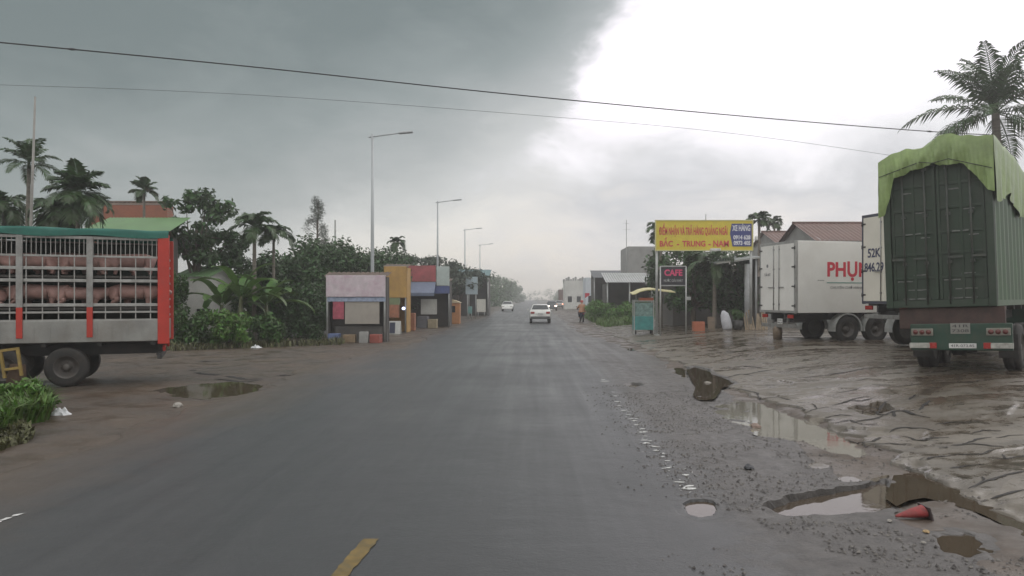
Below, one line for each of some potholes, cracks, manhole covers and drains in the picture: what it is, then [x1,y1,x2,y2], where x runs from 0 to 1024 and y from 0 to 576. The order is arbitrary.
pothole [673,496,727,520]
pothole [753,478,908,519]
pothole [685,365,739,402]
pothole [840,400,900,417]
crack [804,366,1024,499]
pothole [150,381,272,400]
pothole [917,527,1001,564]
